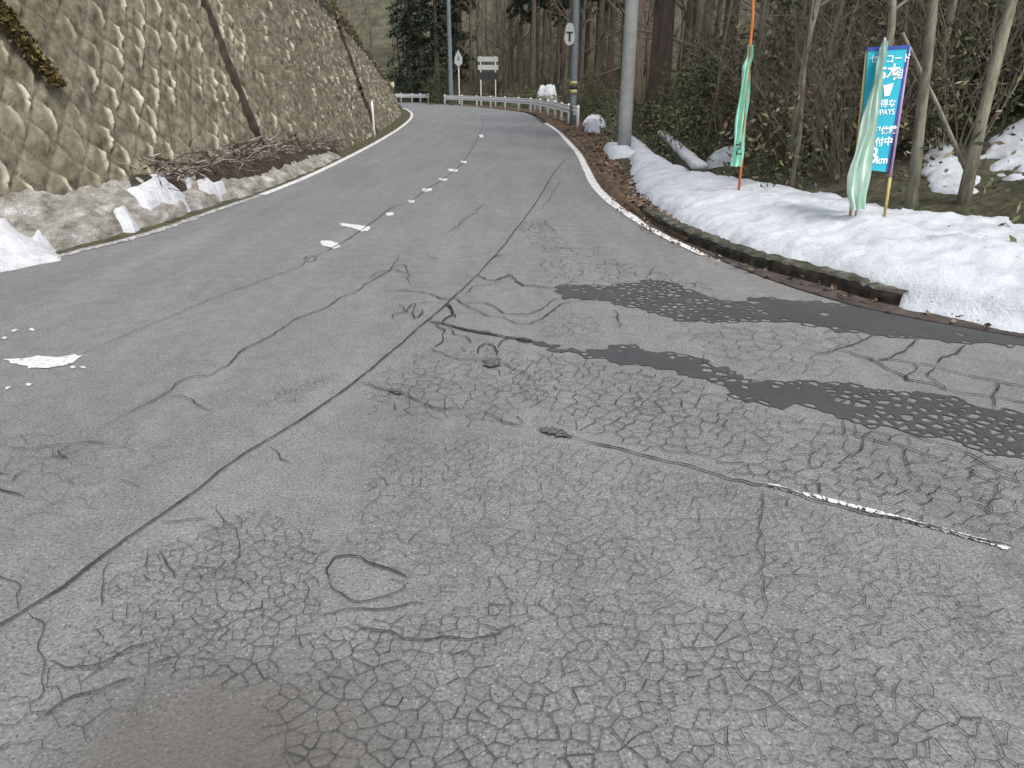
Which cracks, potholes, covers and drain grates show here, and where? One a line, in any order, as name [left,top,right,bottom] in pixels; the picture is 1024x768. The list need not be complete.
pothole [483,357,501,367]
crack [0,187,1024,768]
pothole [539,426,573,437]
